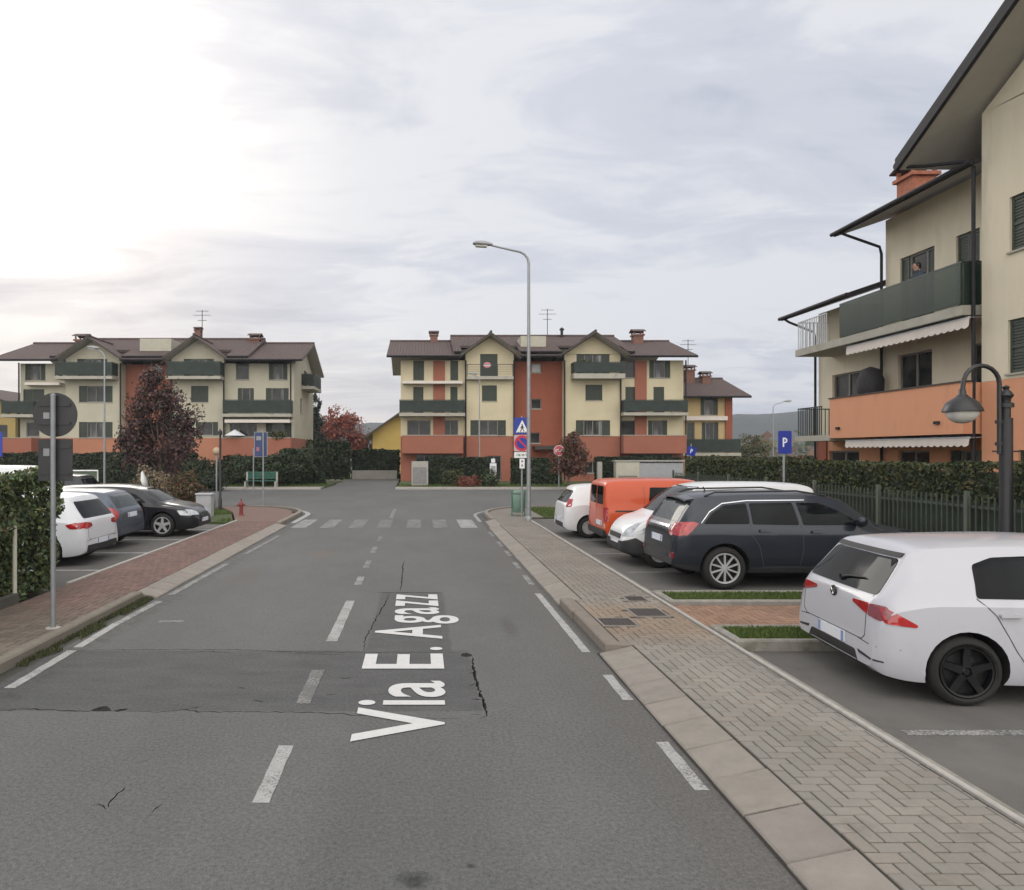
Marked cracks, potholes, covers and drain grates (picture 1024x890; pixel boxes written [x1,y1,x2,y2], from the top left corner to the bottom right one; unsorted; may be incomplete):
crack [363,562,443,649]
crack [92,787,162,812]
crack [469,657,488,719]
